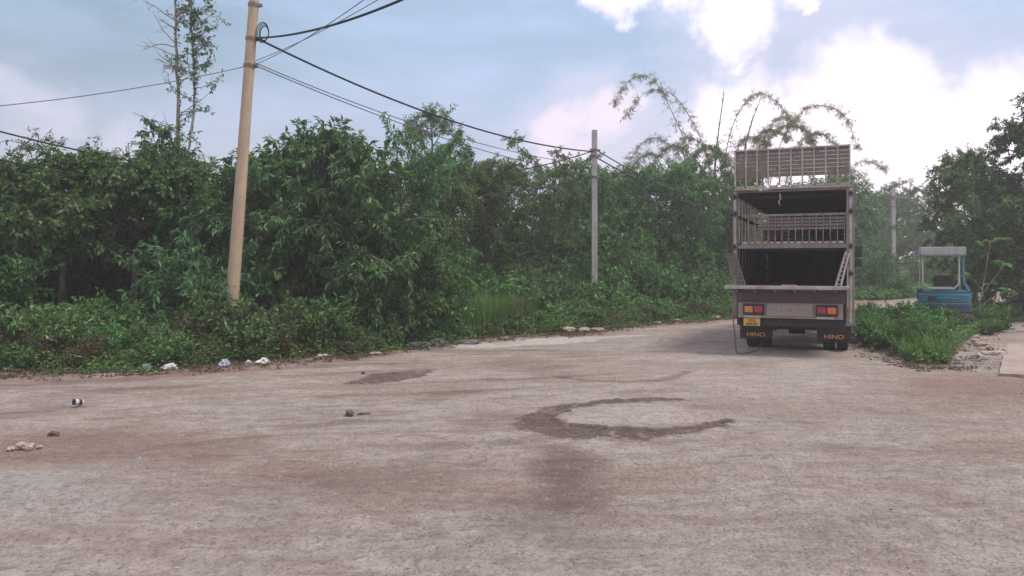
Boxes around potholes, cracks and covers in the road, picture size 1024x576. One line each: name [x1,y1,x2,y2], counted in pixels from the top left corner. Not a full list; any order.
pothole [339,369,439,386]
